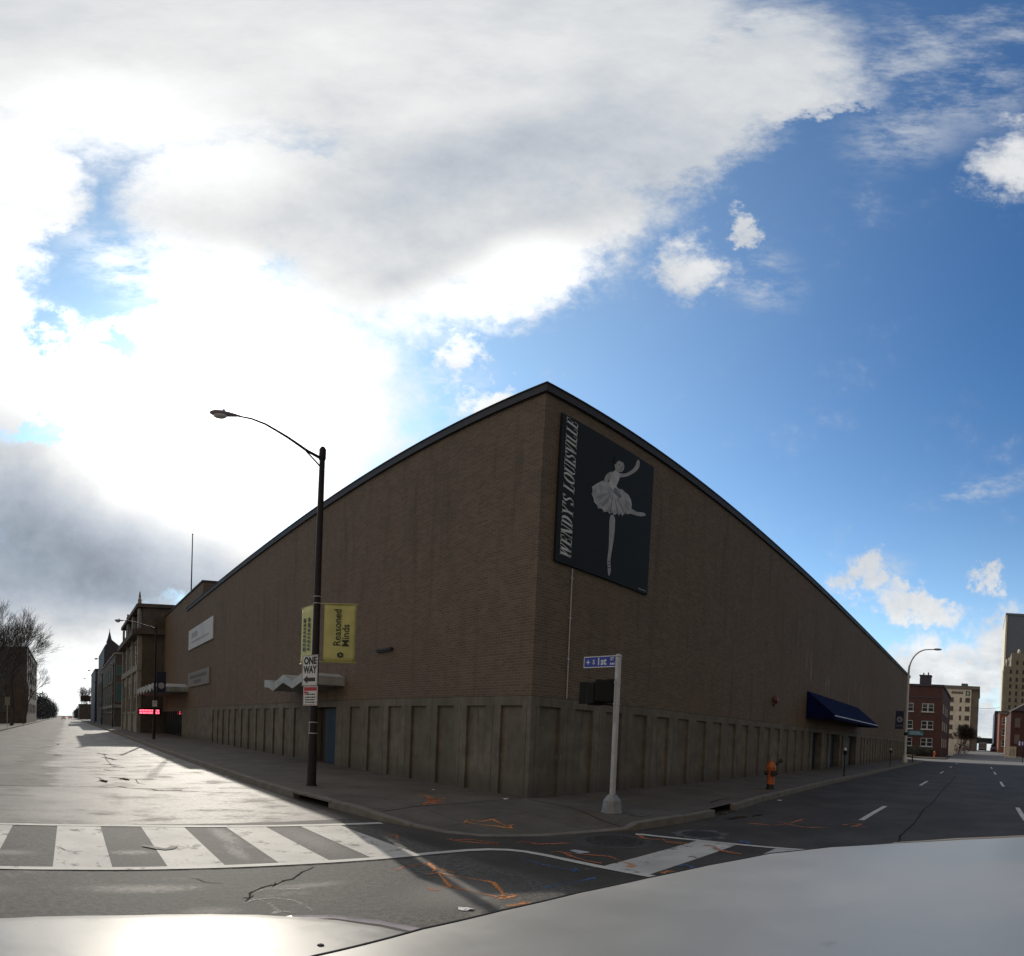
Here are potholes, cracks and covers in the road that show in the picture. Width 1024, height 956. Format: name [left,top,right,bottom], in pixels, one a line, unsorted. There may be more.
manhole cover [671,830,731,840]
drain grate [291,790,337,803]
manhole cover [577,834,653,849]
crack [897,776,956,842]
crack [54,753,140,784]
crack [246,867,313,901]
